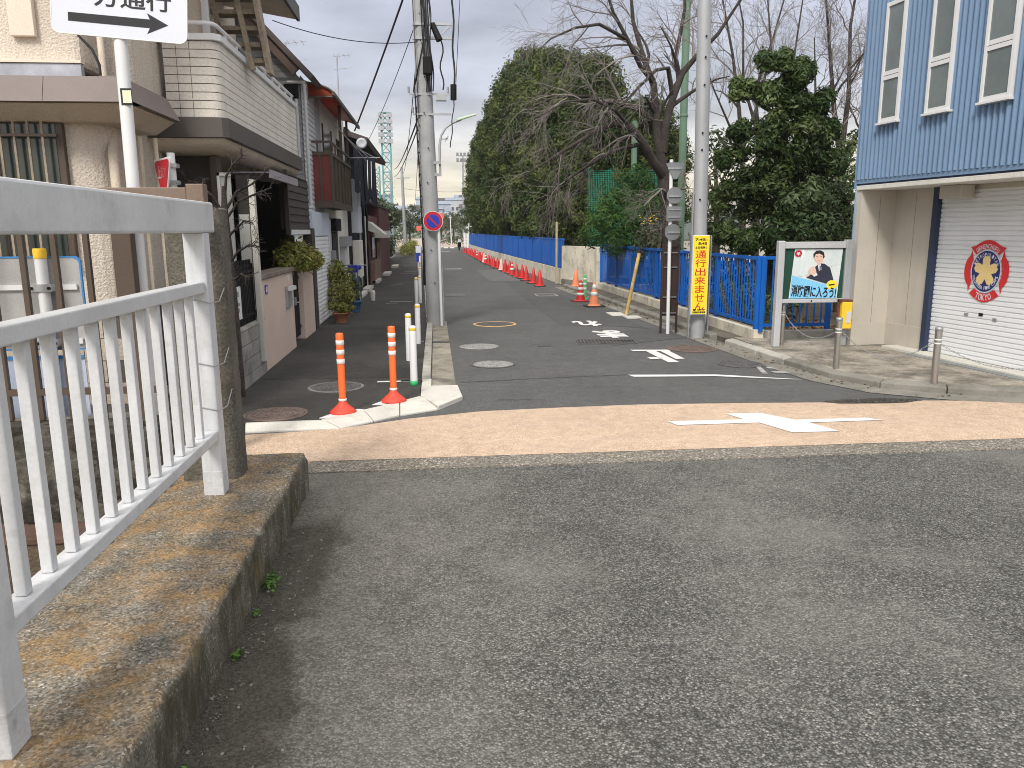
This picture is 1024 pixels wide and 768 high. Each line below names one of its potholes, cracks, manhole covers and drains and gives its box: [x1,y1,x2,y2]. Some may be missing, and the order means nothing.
manhole cover [470,360,516,368]
manhole cover [666,345,717,353]
manhole cover [243,407,308,422]
manhole cover [307,381,364,393]
manhole cover [718,360,763,368]
